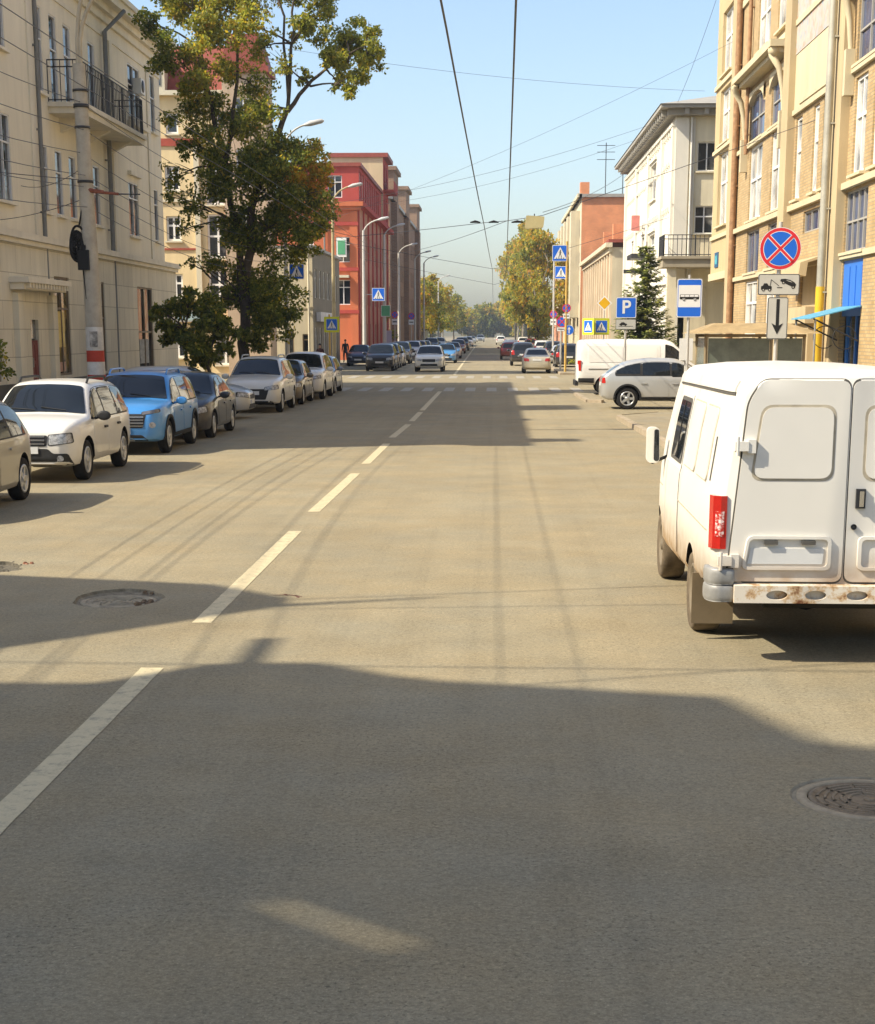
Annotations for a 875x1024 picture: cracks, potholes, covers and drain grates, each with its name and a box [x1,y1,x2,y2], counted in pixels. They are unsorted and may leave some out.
manhole cover [73,589,165,608]
manhole cover [790,777,875,821]
